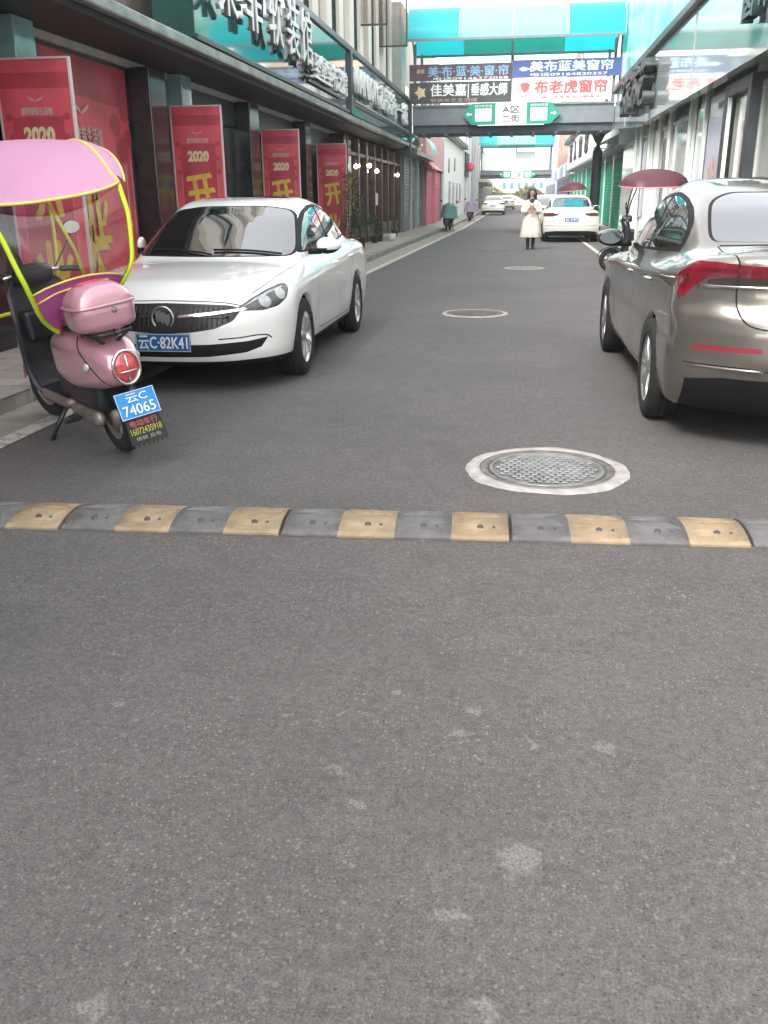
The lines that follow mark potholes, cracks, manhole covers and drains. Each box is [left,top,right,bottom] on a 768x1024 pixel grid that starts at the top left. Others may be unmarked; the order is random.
manhole cover [465,447,630,495]
manhole cover [442,309,508,318]
